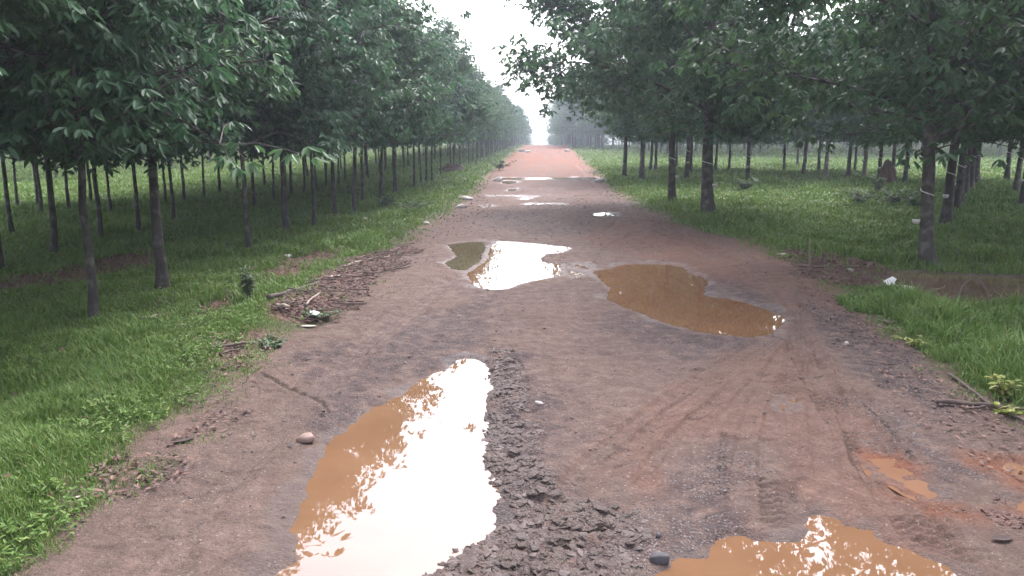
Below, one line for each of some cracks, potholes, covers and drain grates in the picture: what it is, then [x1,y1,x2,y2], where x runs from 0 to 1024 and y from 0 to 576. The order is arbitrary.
pothole [442,240,489,271]
pothole [640,508,973,576]
pothole [258,354,513,576]
pothole [462,239,575,290]
pothole [591,262,790,337]
pothole [861,455,962,504]
crack [257,372,331,427]
